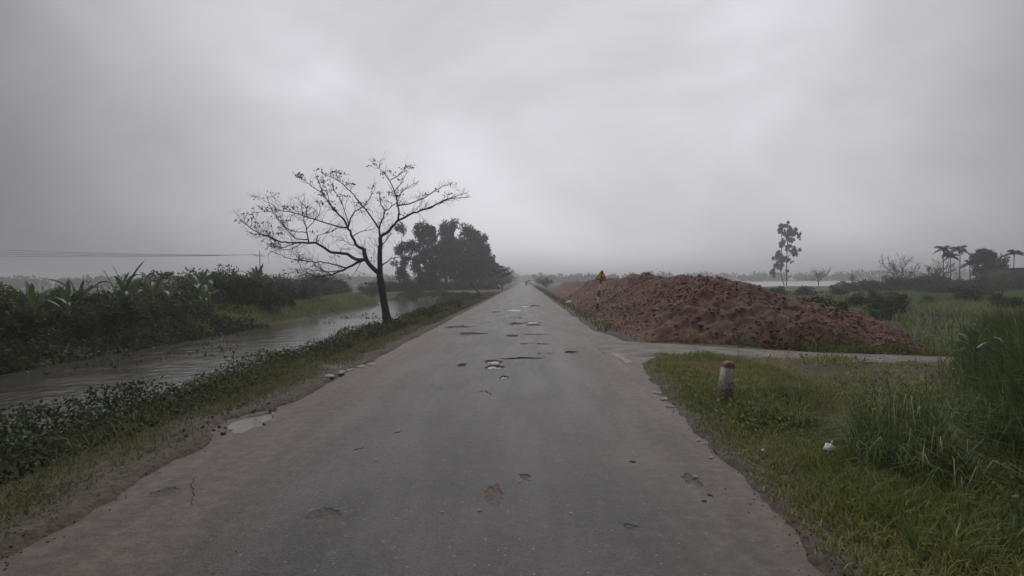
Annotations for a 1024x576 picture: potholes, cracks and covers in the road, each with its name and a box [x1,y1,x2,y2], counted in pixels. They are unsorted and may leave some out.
pothole [681,472,704,487]
pothole [304,507,341,521]
pothole [484,483,504,509]
pothole [147,486,181,498]
